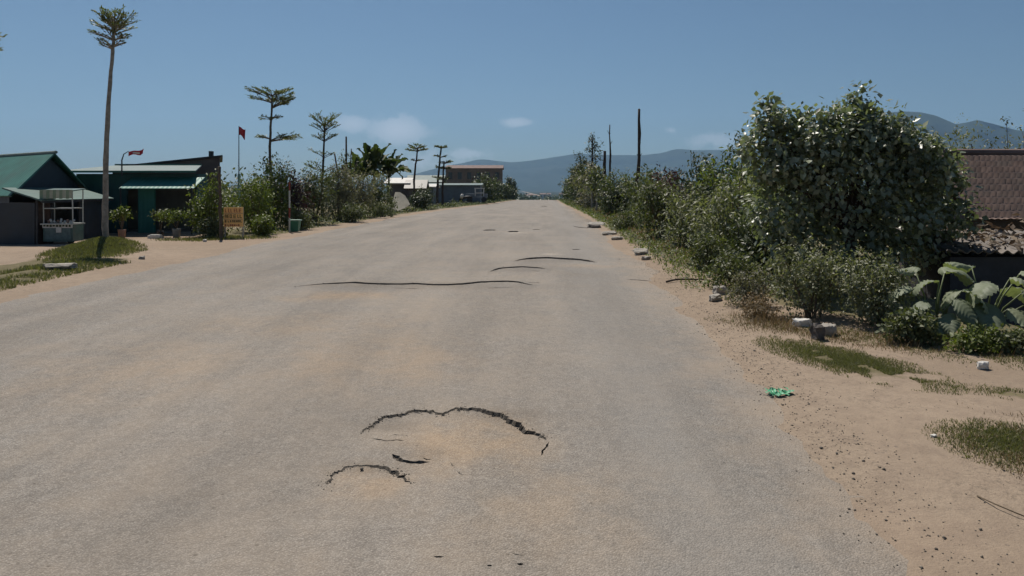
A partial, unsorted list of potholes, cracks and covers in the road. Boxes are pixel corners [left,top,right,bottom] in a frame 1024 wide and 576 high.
crack [376,439,430,464]
